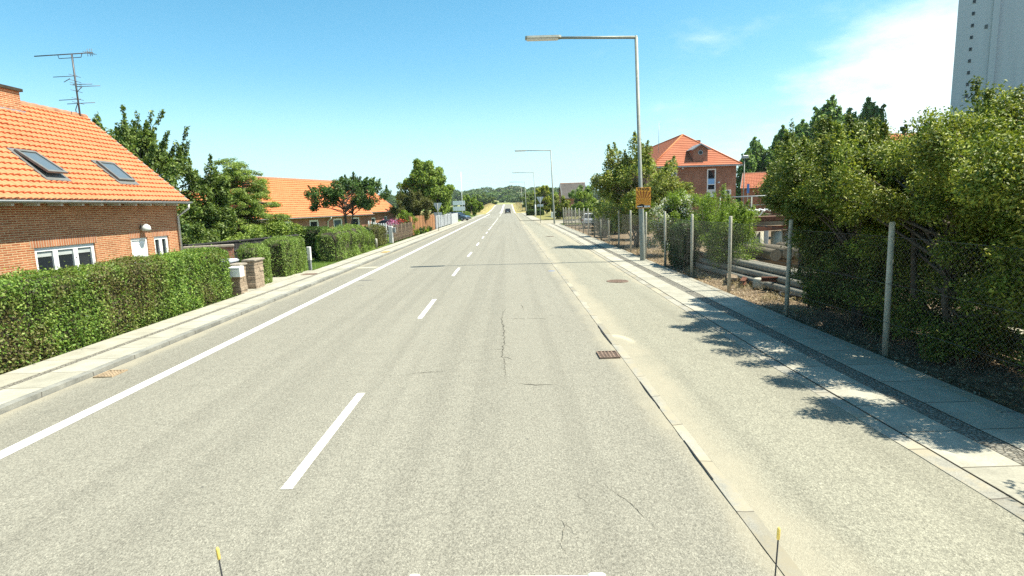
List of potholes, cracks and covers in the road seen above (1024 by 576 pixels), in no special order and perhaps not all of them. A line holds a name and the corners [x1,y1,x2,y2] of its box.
crack [495,305,552,385]
drain grate [596,350,621,359]
drain grate [93,369,128,378]
